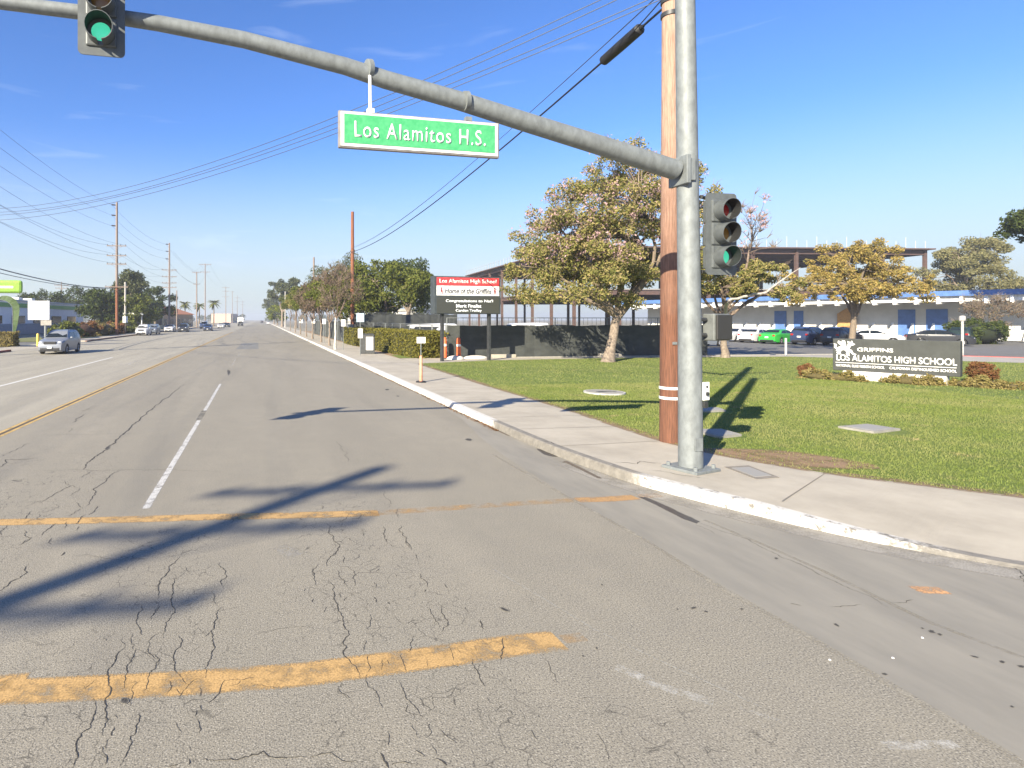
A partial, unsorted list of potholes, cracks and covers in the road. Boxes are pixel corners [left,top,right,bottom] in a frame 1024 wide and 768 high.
crack [167,747,356,767]
crack [65,557,270,768]
crack [258,507,454,768]
crack [0,385,183,560]
utility cover [838,424,900,434]
utility cover [725,465,779,480]
utility cover [703,429,742,439]
crack [451,620,505,701]
